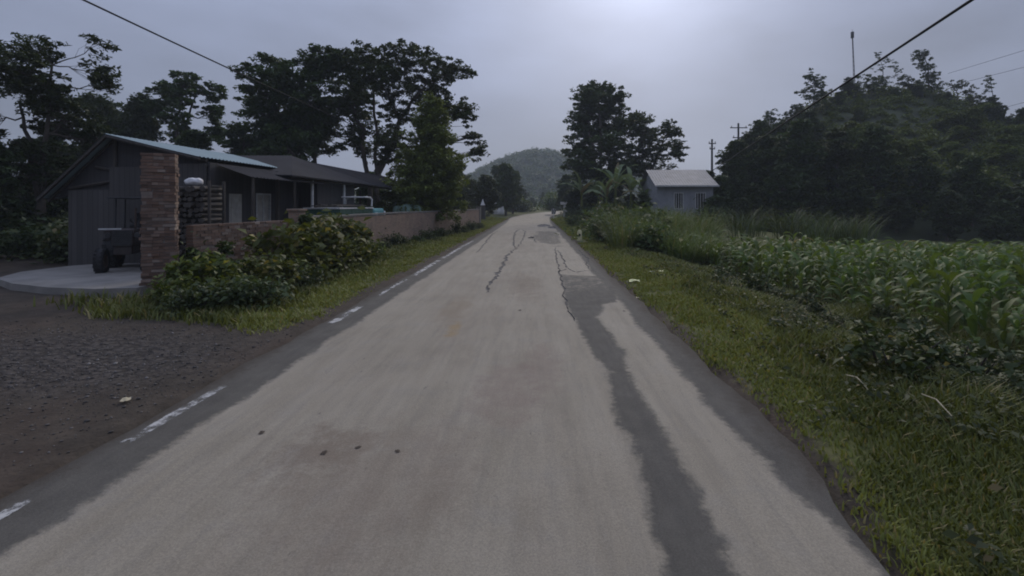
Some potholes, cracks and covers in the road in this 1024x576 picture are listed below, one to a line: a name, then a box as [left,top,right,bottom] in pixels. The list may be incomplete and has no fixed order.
crack [477,229,536,292]
crack [555,248,589,321]
